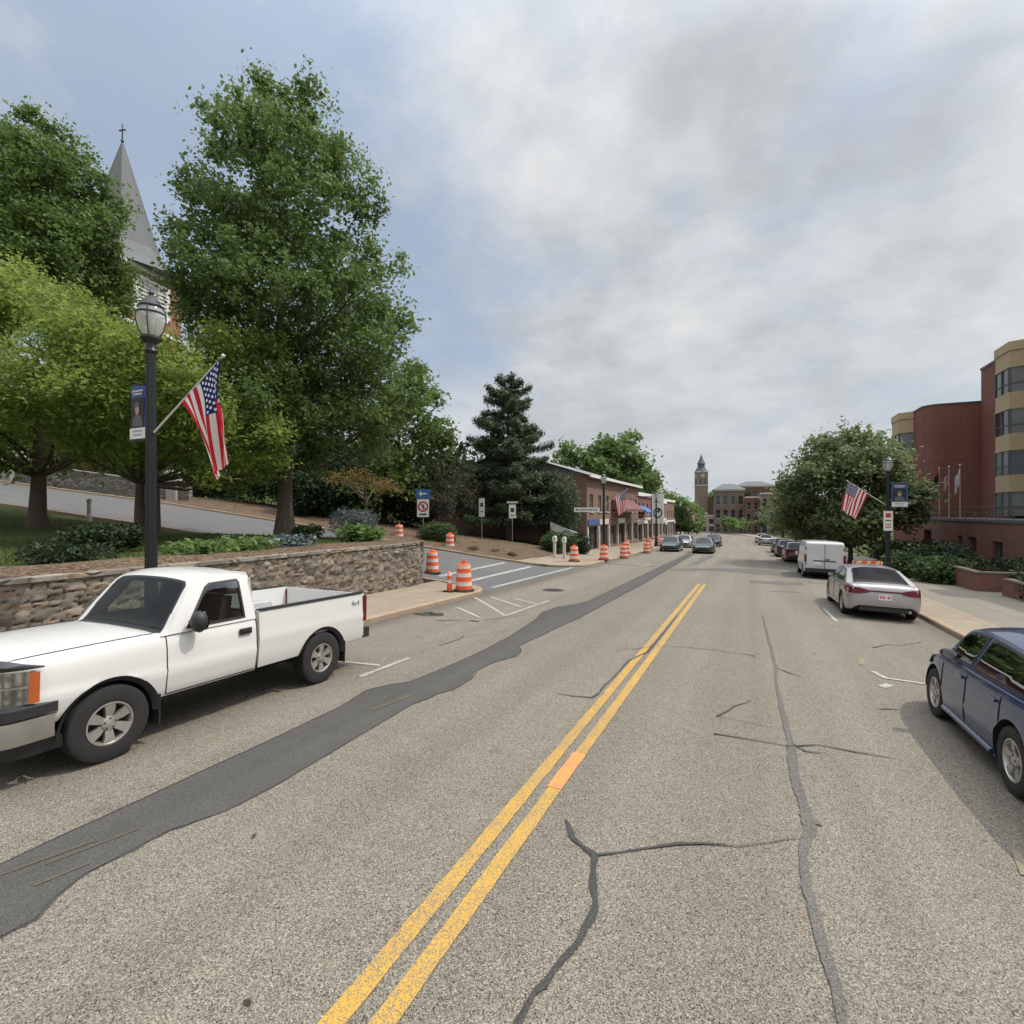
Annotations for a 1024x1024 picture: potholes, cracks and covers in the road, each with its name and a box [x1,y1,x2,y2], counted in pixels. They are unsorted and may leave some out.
crack [560,616,754,698]
crack [513,819,803,1024]
crack [714,700,892,758]
